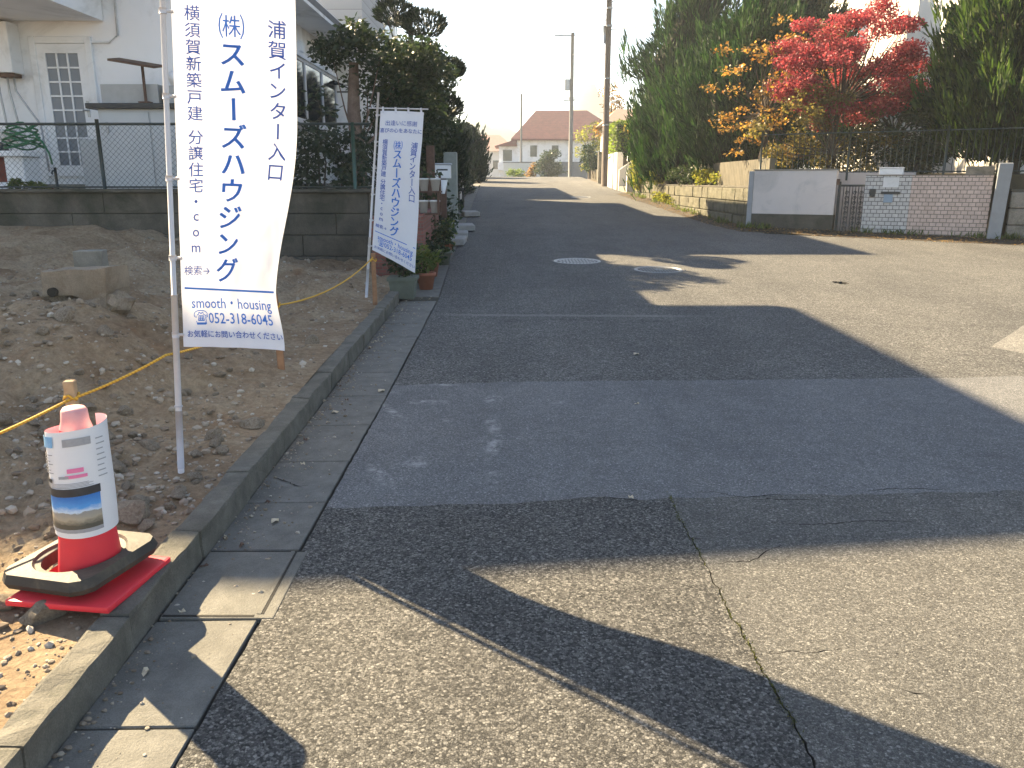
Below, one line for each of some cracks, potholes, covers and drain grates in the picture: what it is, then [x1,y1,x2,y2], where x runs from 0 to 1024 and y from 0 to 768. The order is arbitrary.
crack [667,491,839,768]
